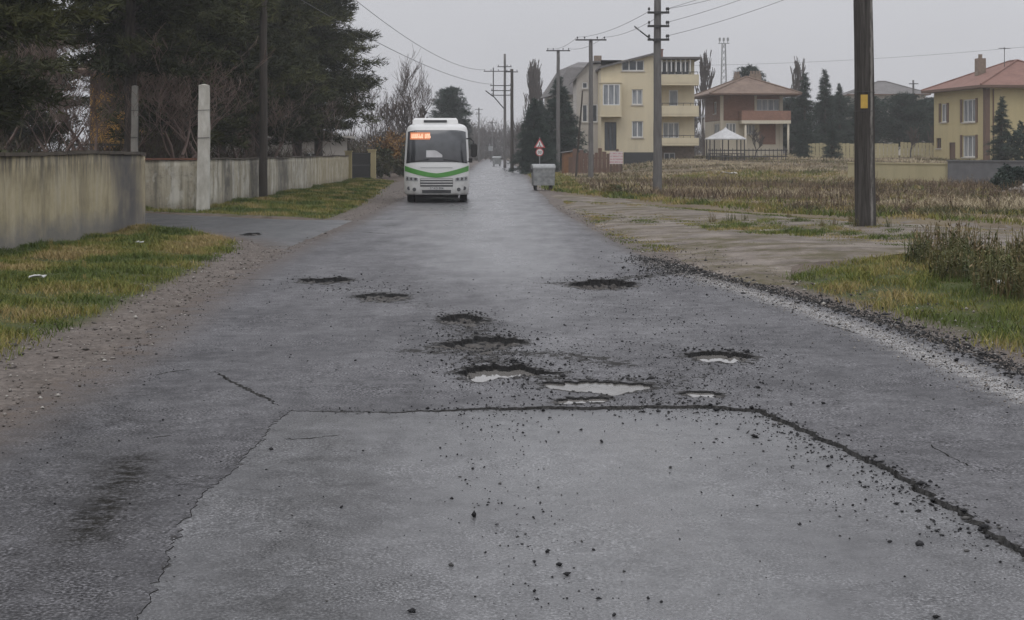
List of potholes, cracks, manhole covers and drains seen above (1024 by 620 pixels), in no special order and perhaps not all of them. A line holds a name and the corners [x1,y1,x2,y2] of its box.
pothole [540,381,653,396]
pothole [354,292,409,303]
pothole [566,279,639,290]
pothole [432,336,529,355]
pothole [684,351,755,363]
pothole [455,363,563,382]
pothole [439,314,491,327]
